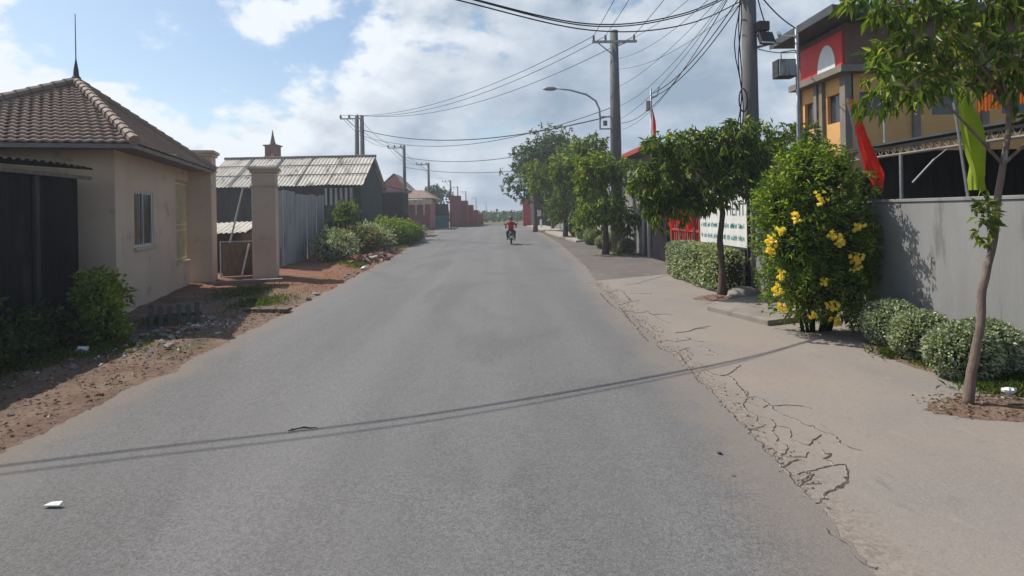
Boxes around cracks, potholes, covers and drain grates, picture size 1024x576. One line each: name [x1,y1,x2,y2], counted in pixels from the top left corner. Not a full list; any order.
crack [591,275,861,504]
crack [825,527,882,571]
